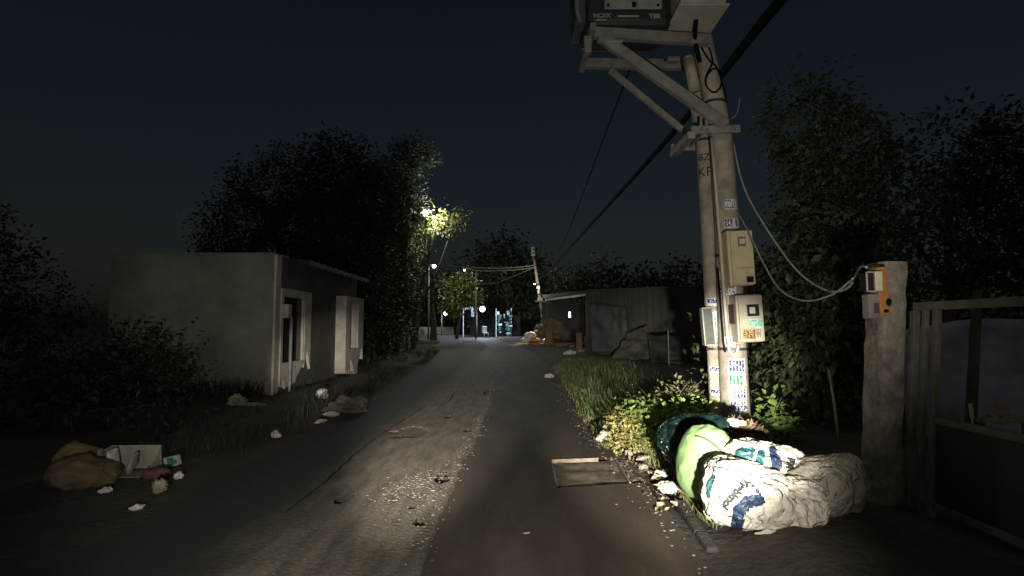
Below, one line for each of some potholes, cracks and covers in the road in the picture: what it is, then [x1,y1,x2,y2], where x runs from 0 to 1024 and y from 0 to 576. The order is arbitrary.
pothole [434,471,451,484]
